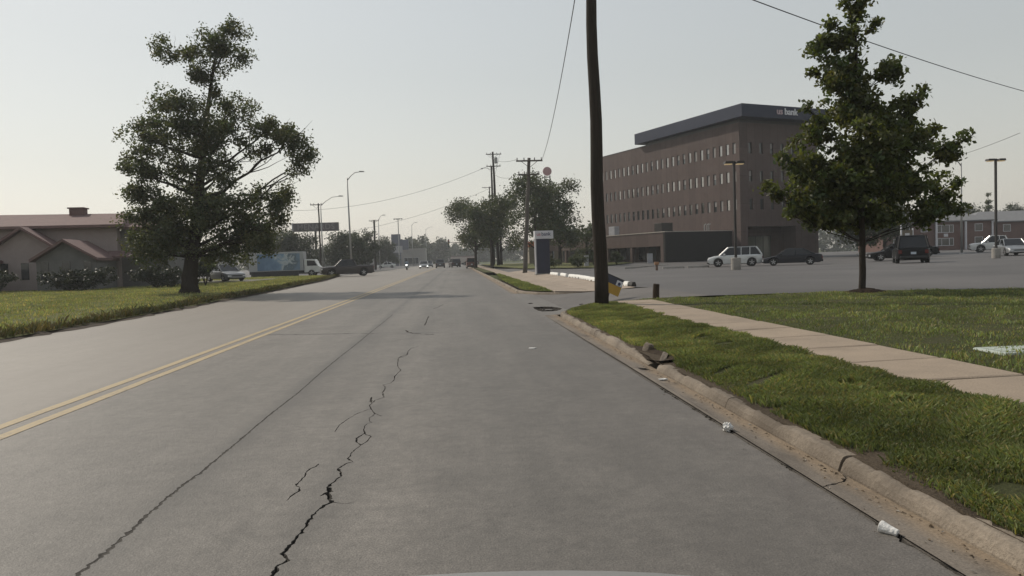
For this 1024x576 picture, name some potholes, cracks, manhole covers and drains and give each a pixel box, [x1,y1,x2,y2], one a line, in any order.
crack [270,346,418,576]
